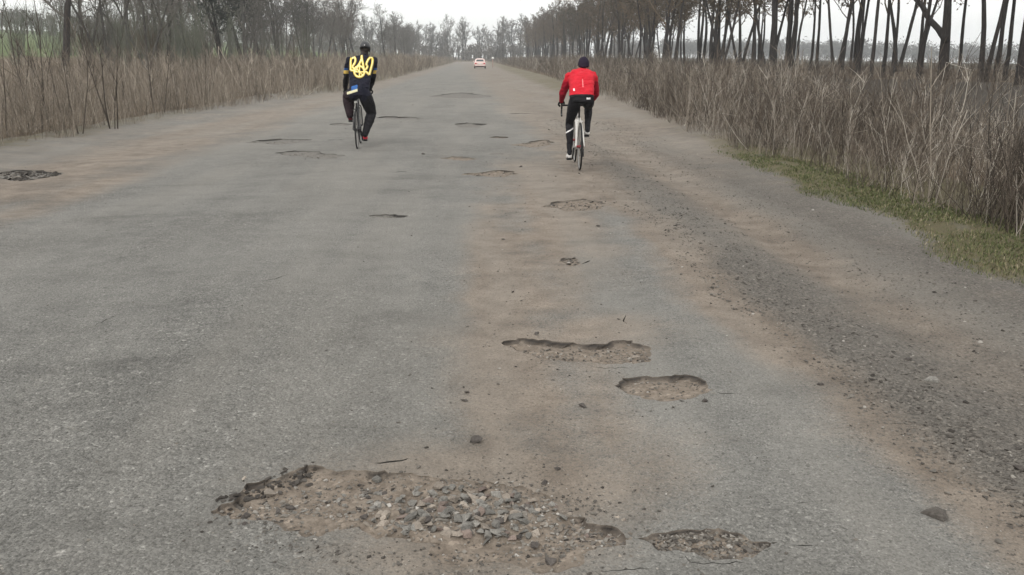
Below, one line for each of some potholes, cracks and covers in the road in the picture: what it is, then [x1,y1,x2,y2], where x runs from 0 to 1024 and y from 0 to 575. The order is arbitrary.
pothole [278,150,345,159]
pothole [502,338,651,364]
pothole [615,374,712,402]
pothole [512,140,555,148]
pothole [211,465,628,574]
pothole [541,199,606,211]
pothole [638,528,777,560]
pothole [0,170,63,181]
